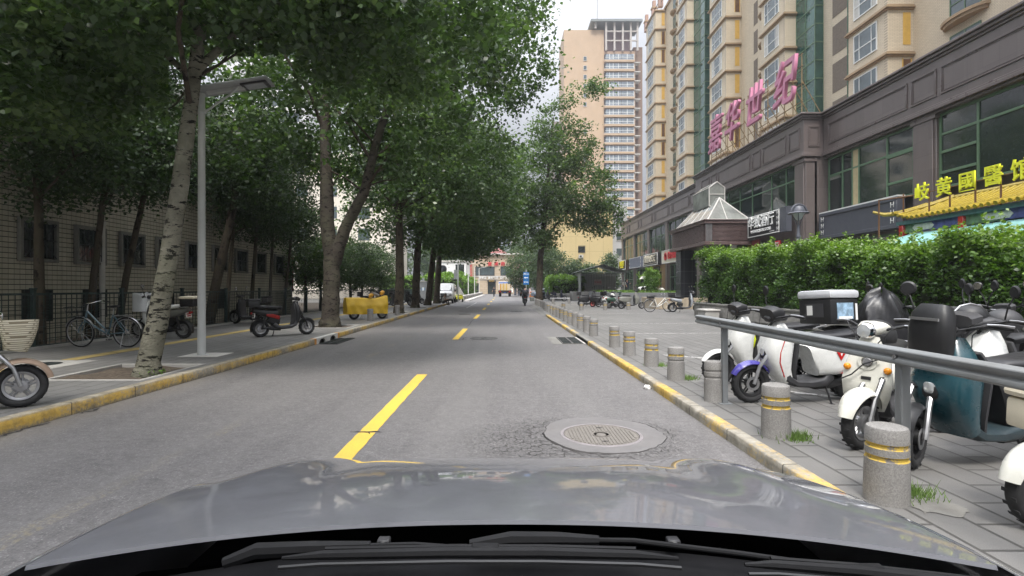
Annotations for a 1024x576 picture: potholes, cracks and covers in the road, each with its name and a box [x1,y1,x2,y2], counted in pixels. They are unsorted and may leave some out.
drain grate [312,332,339,345]
manhole cover [544,417,667,455]
